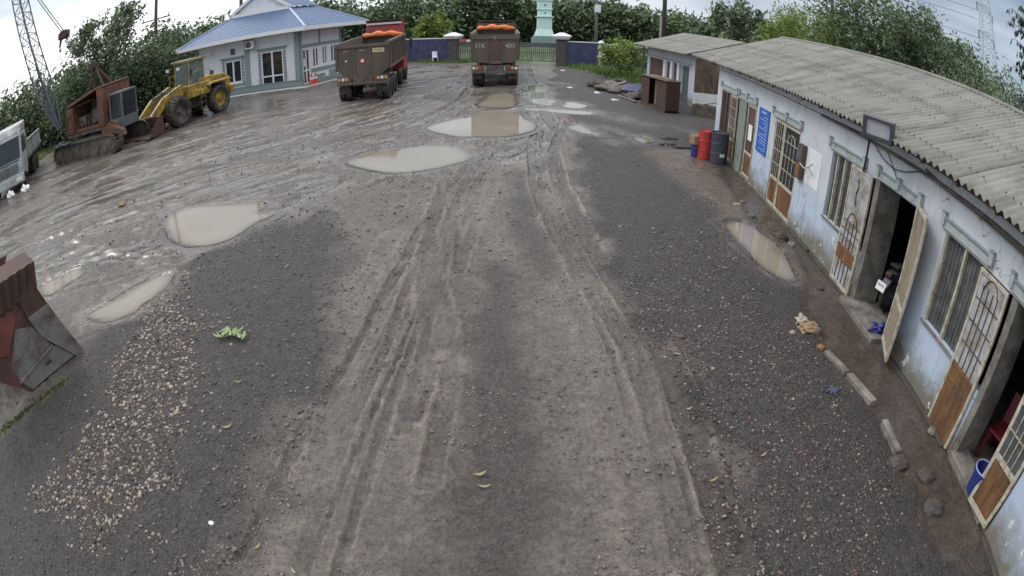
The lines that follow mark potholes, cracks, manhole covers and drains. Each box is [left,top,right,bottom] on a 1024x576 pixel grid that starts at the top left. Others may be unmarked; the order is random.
pothole [521,84,554,93]
pothole [336,143,484,175]
pothole [473,92,523,109]
pothole [720,216,806,286]
pothole [418,110,545,139]
pothole [560,123,604,137]
pothole [37,261,95,299]
pothole [79,265,184,326]
pothole [523,97,566,107]
pothole [156,198,288,254]
pothole [551,101,592,109]
